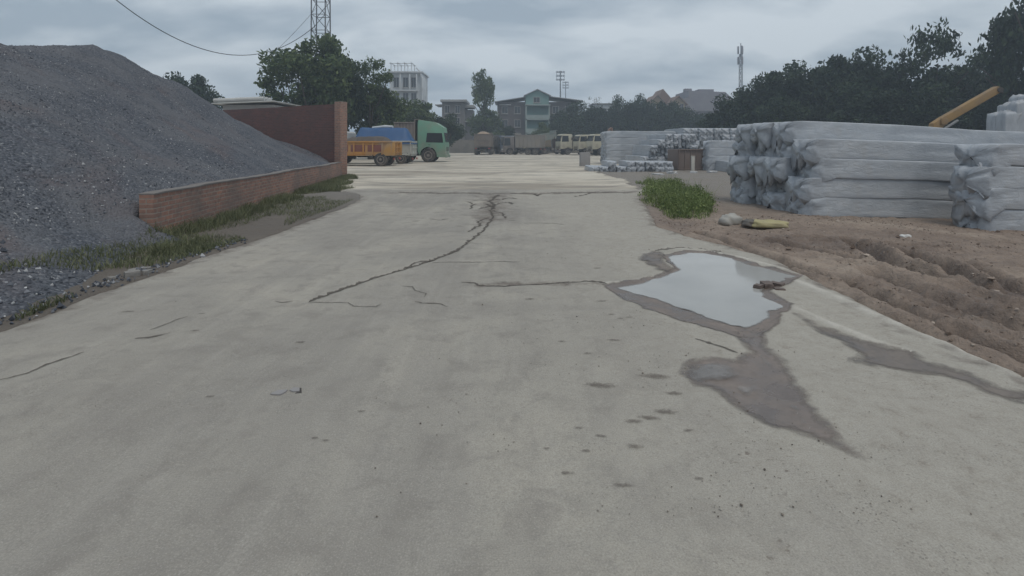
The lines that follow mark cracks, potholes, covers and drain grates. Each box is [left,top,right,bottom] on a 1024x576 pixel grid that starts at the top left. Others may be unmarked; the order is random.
crack [0,352,82,380]
pothole [603,250,802,338]
crack [309,192,622,307]
